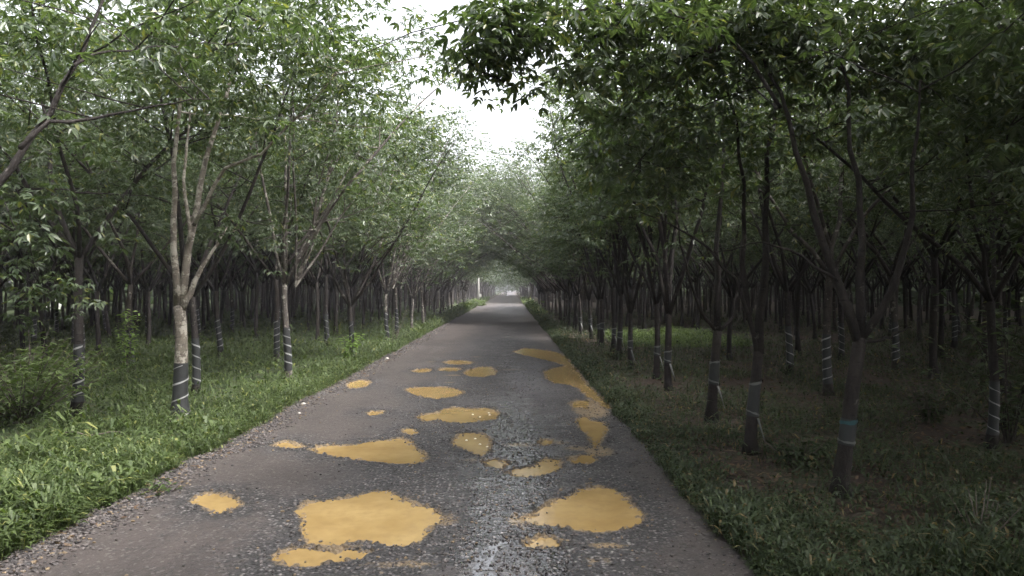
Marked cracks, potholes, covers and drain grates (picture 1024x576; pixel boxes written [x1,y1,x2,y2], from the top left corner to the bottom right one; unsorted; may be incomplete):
pothole [415,406,499,424]
pothole [507,456,565,477]
pothole [464,366,497,377]
pothole [403,386,466,400]
pothole [574,414,609,449]
pothole [345,378,373,389]
pothole [309,436,428,464]
pothole [271,440,308,448]
pothole [449,431,494,457]
pothole [270,544,375,567]
pothole [523,483,646,532]
pothole [513,348,613,410]
